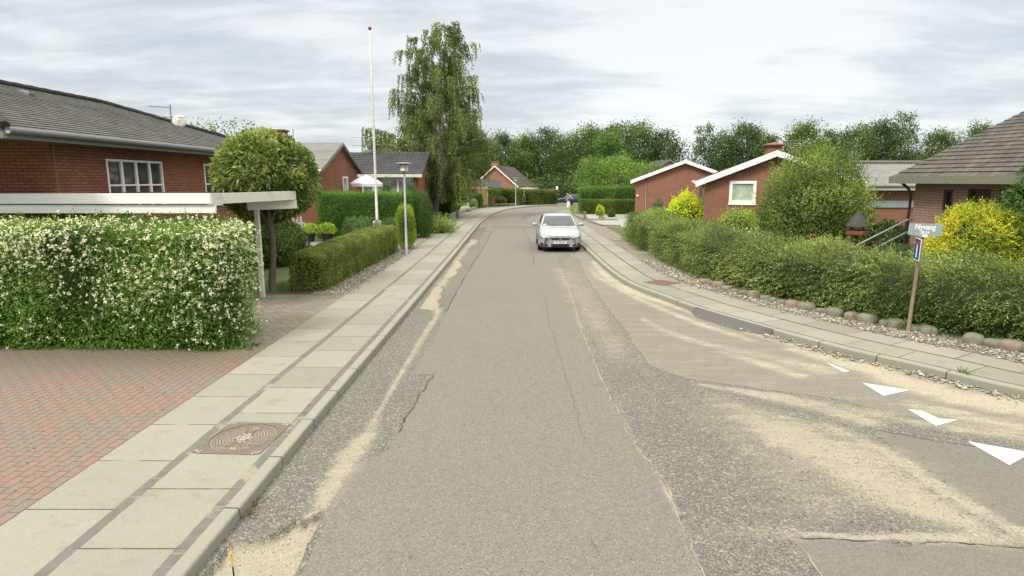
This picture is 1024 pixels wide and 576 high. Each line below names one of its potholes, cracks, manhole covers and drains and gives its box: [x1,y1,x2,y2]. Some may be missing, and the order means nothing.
manhole cover [192,422,291,455]
crack [399,374,434,432]
